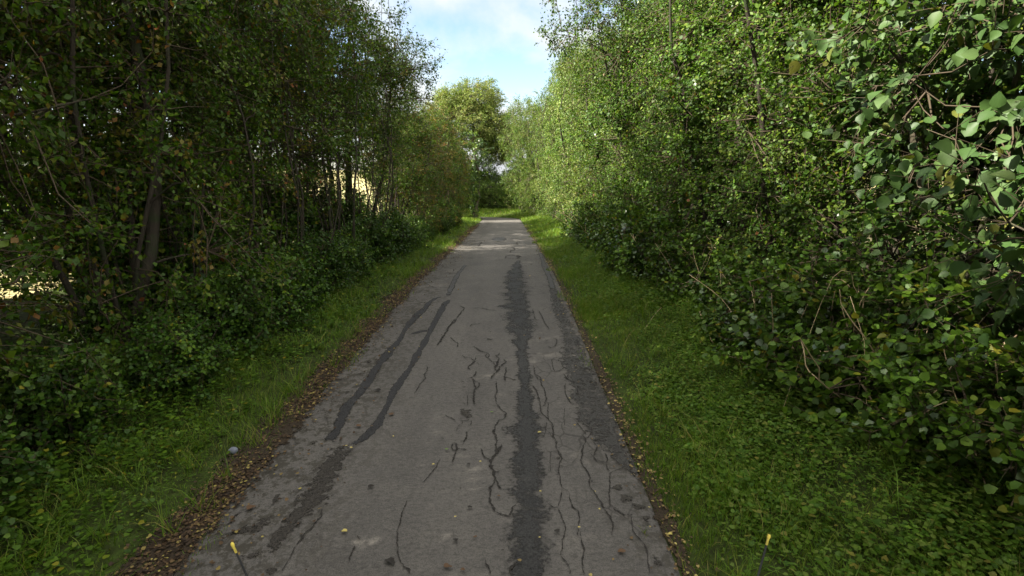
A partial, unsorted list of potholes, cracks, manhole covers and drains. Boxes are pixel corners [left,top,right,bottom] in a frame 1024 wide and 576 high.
crack [396,501,411,573]
crack [423,305,650,574]
